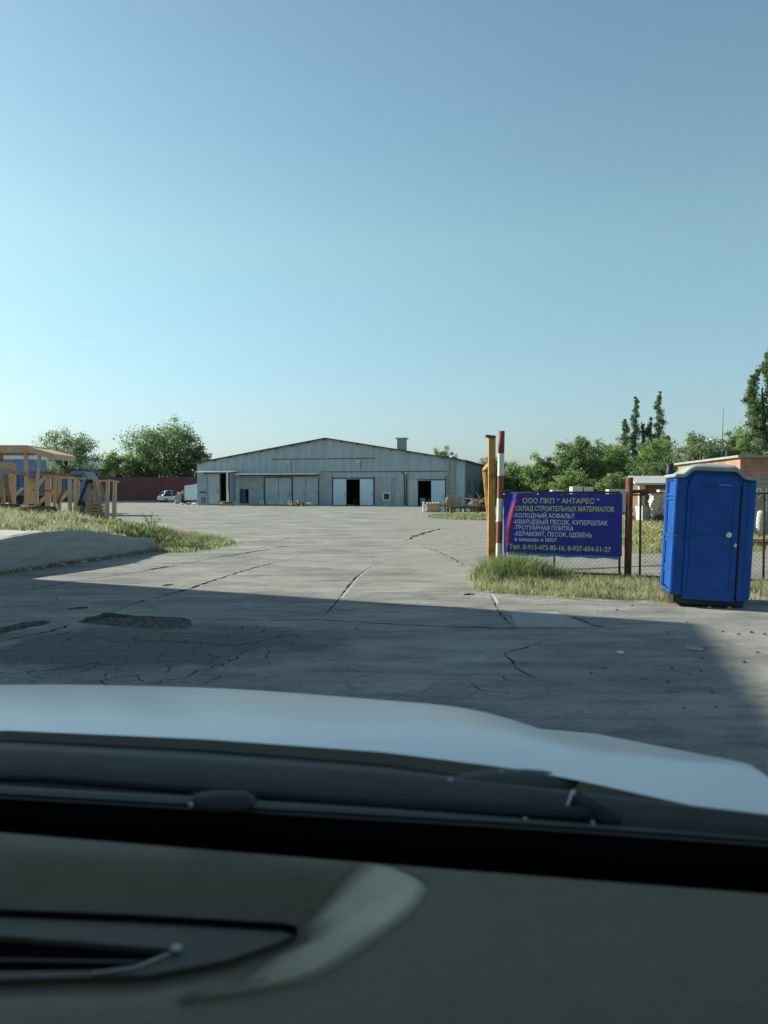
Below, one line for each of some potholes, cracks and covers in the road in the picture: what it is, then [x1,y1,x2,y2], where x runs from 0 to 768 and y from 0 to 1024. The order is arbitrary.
crack [391,641,543,710]
pothole [78,613,192,630]
pothole [0,621,50,634]
crack [0,626,299,687]
crack [322,570,510,624]
crack [405,529,465,566]
